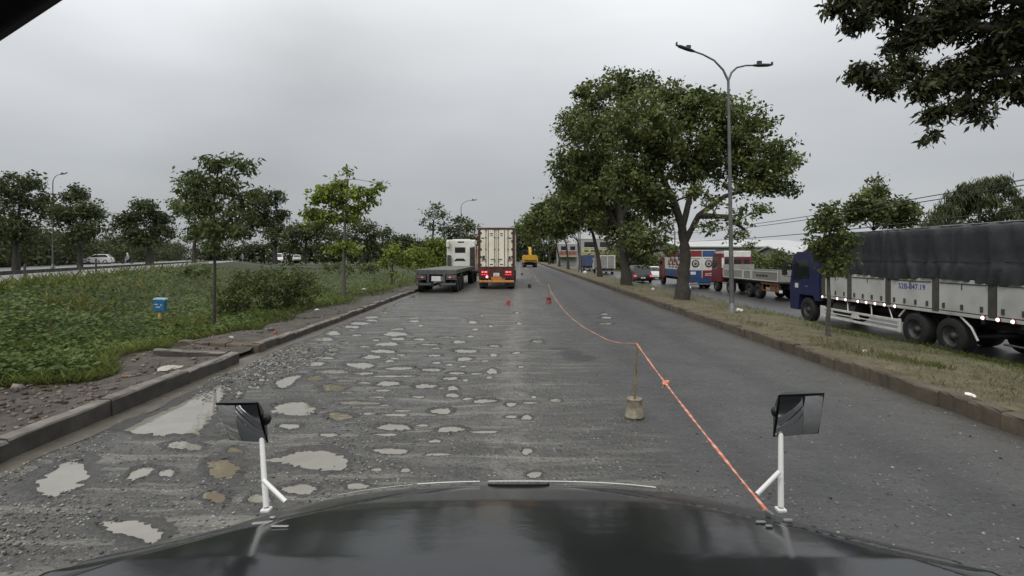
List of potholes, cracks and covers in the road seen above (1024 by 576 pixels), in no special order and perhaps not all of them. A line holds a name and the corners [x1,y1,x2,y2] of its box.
pothole [8,452,109,504]
pothole [274,480,323,498]
pothole [364,445,415,456]
pothole [260,395,327,419]
pothole [268,373,308,390]
pothole [255,443,358,477]
pothole [432,425,473,434]
pothole [118,463,164,484]
pothole [108,379,241,444]
pothole [519,446,535,456]
pothole [367,421,415,433]
pothole [156,438,213,453]
